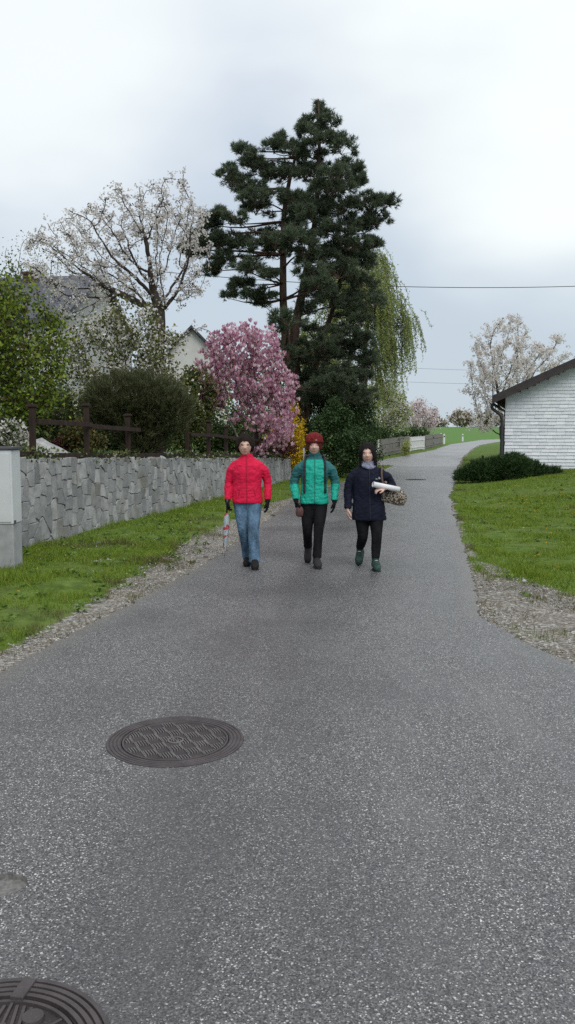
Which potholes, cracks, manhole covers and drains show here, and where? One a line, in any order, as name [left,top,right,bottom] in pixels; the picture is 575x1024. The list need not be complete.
manhole cover [0,977,110,1024]
manhole cover [106,716,244,768]
